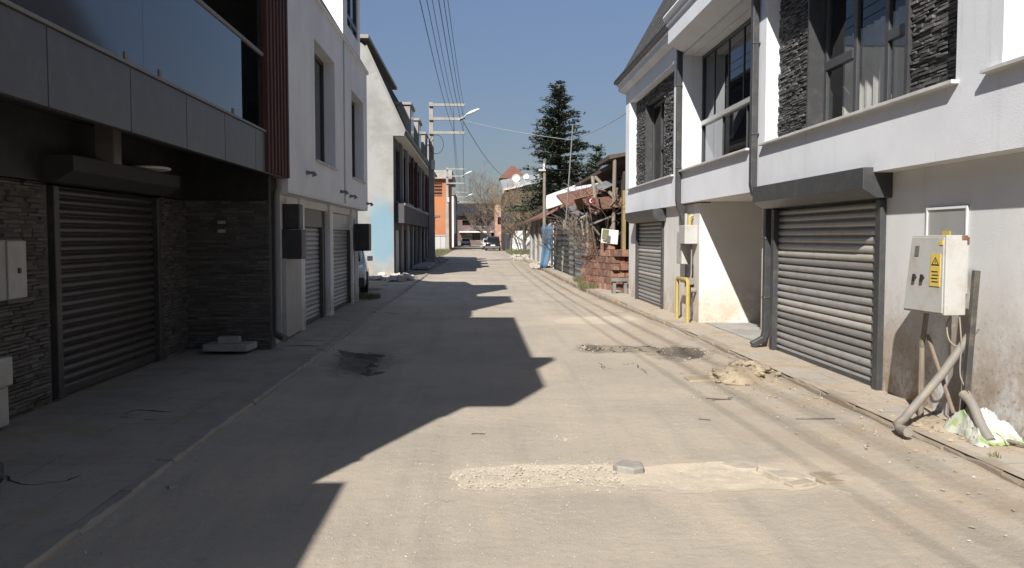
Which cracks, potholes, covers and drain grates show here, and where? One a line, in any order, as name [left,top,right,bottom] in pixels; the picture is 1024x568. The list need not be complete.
crack [599,346,656,374]
pothole [656,347,704,360]
crack [6,475,80,485]
pothole [337,350,386,377]
